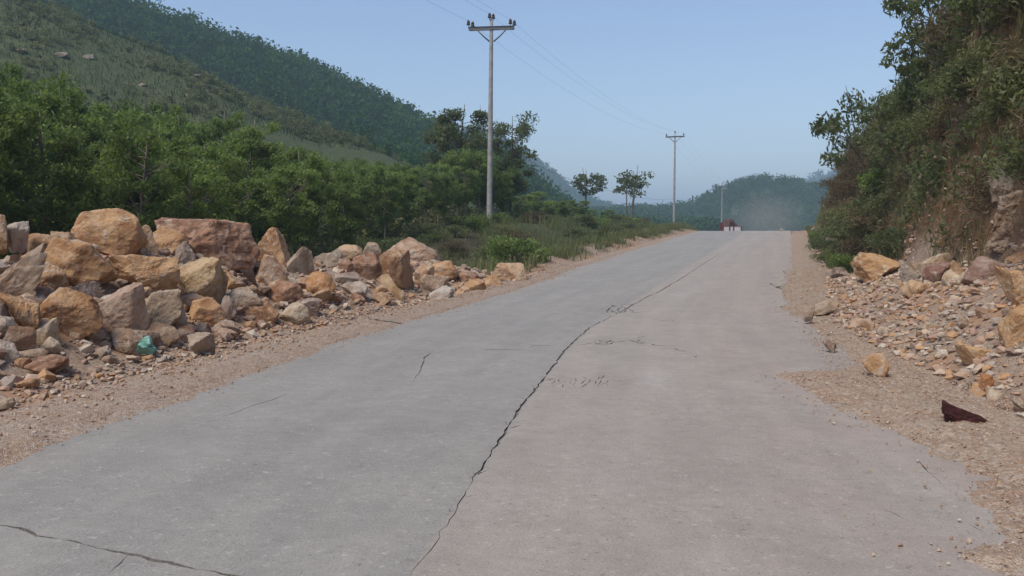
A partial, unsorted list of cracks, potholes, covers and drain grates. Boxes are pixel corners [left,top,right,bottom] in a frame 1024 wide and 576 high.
crack [0,525,239,576]
crack [412,255,717,571]
